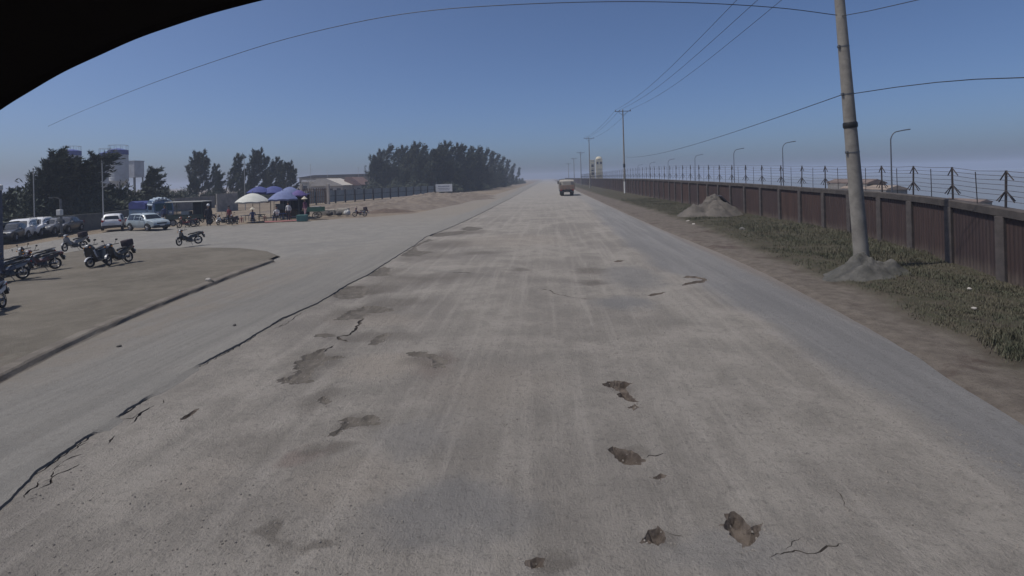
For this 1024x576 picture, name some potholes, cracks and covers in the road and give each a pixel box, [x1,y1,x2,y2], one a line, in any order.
pothole [602,380,639,402]
crack [124,399,164,422]
pothole [719,511,763,548]
pothole [524,557,545,569]
crack [23,434,114,500]
crack [771,538,849,560]
crack [324,319,363,352]
pothole [639,526,666,546]
pothole [608,446,646,465]
